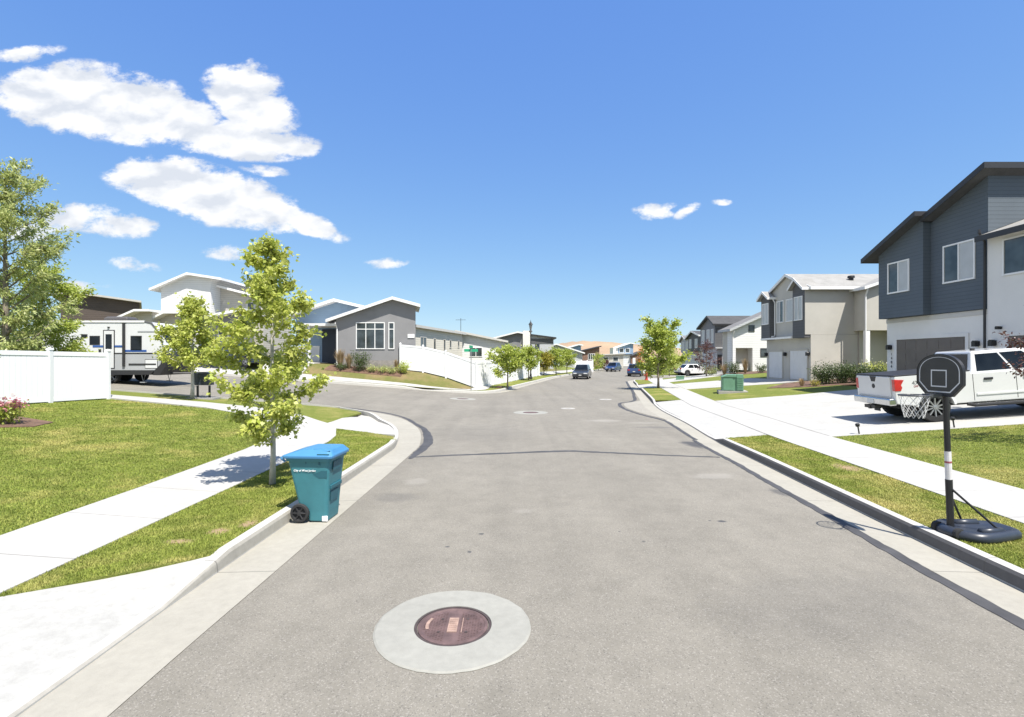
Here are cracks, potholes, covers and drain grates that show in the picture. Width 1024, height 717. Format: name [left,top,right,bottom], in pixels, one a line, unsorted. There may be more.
manhole cover [373,590,531,674]
